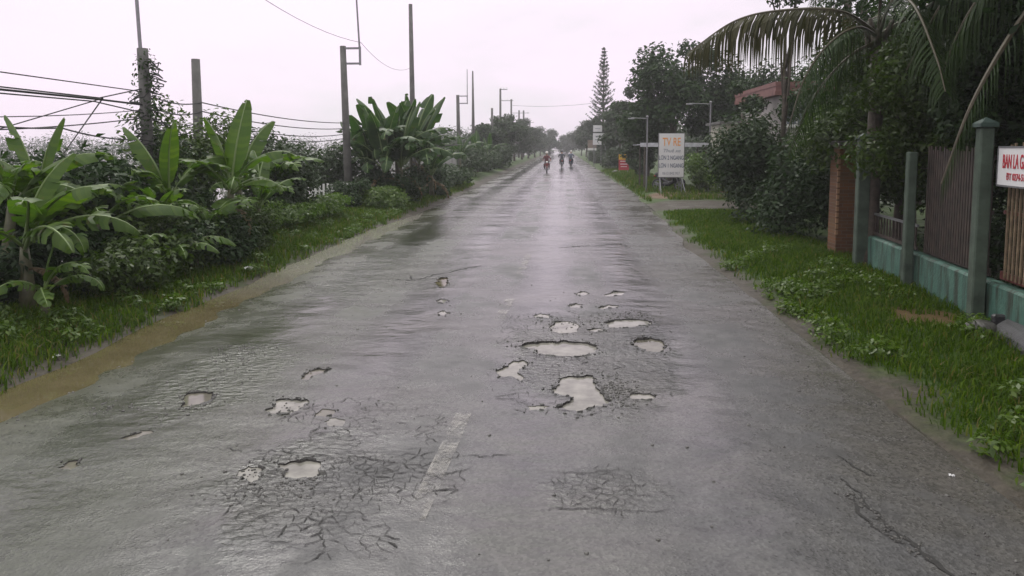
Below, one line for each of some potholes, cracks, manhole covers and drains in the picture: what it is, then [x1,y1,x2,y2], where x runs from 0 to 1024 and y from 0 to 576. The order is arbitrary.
pothole [434,277,450,288]
pothole [301,366,332,380]
pothole [58,457,83,469]
pothole [630,336,671,355]
pothole [265,395,315,417]
pothole [178,388,221,409]
pothole [493,357,533,382]
pothole [541,371,616,418]
pothole [324,417,345,428]
pothole [264,455,325,481]
pothole [599,318,654,328]
pothole [233,465,265,485]
